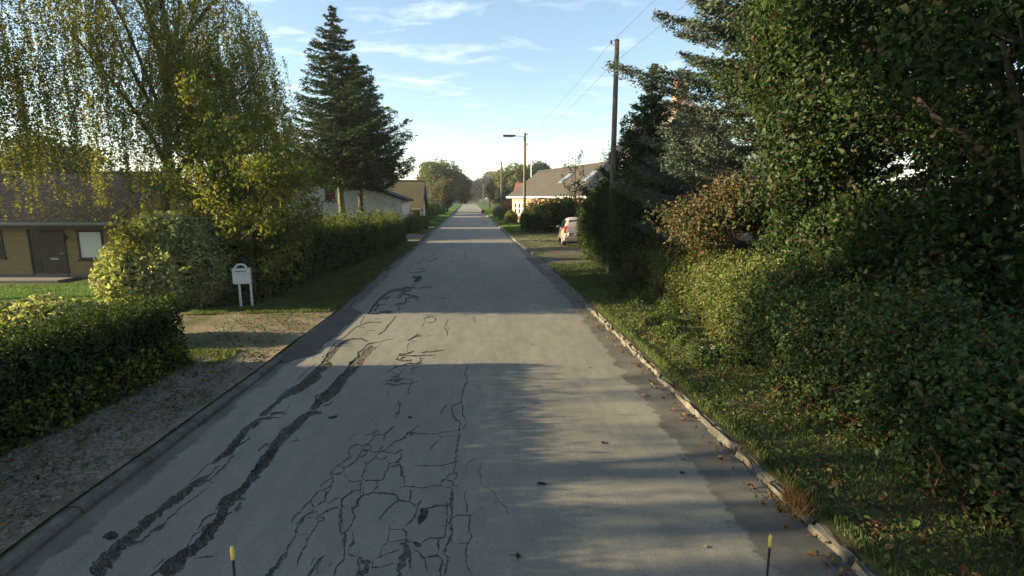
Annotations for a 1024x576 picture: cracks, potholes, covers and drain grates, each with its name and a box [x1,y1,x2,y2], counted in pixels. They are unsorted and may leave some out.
pothole [417,508,428,525]
crack [89,253,508,576]
pothole [102,531,119,540]
